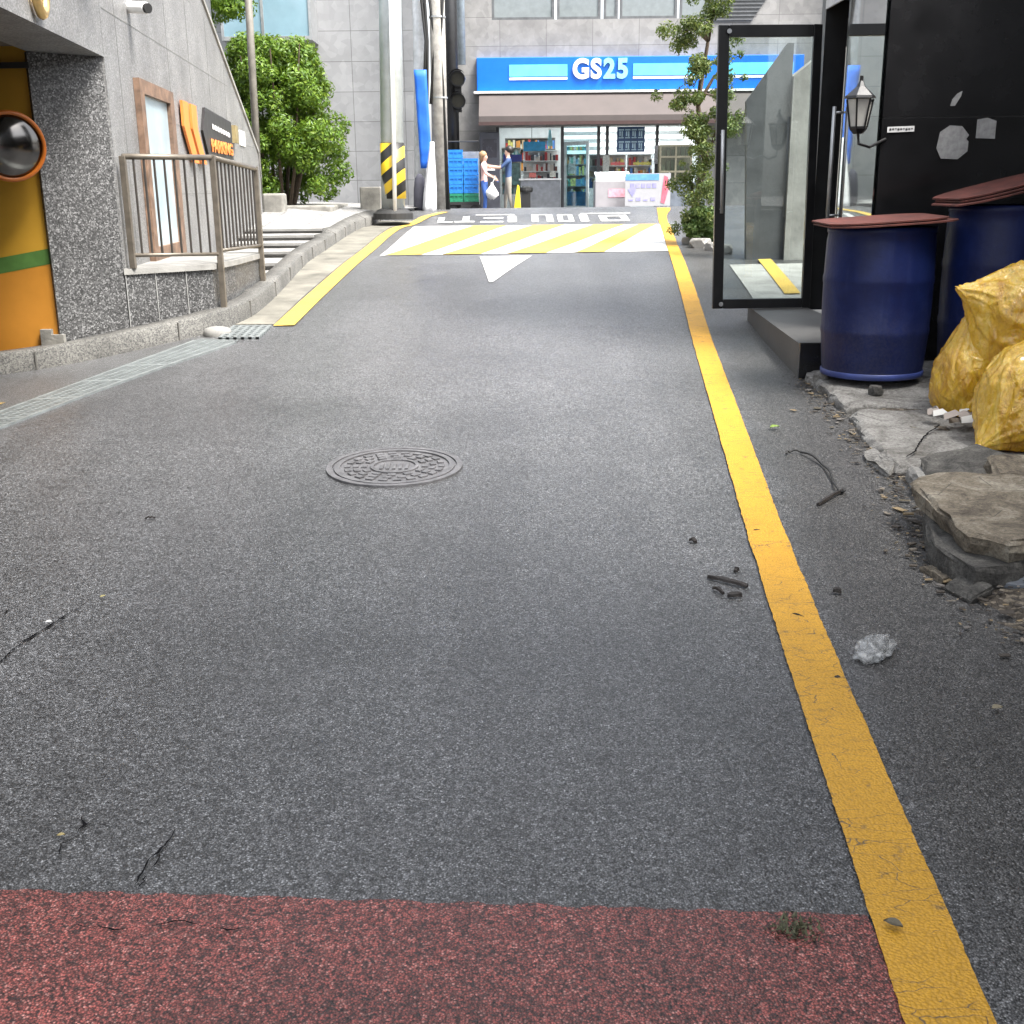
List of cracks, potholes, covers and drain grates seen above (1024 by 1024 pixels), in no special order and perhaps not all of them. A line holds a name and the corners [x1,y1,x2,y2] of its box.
crack [67,920,242,931]
crack [132,830,175,888]
manhole cover [326,447,462,488]
crack [0,603,85,662]
crack [59,816,110,854]
drain grate [203,325,272,340]
